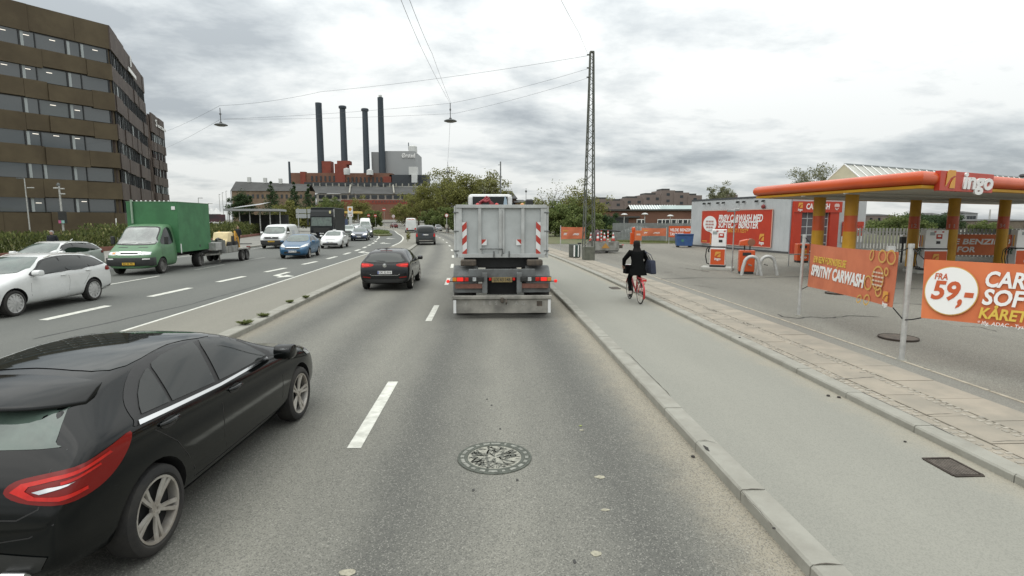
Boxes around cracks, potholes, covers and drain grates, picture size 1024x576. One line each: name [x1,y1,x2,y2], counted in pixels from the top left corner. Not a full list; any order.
manhole cover [457,442,532,475]
drain grate [922,457,985,477]
manhole cover [877,333,920,342]
